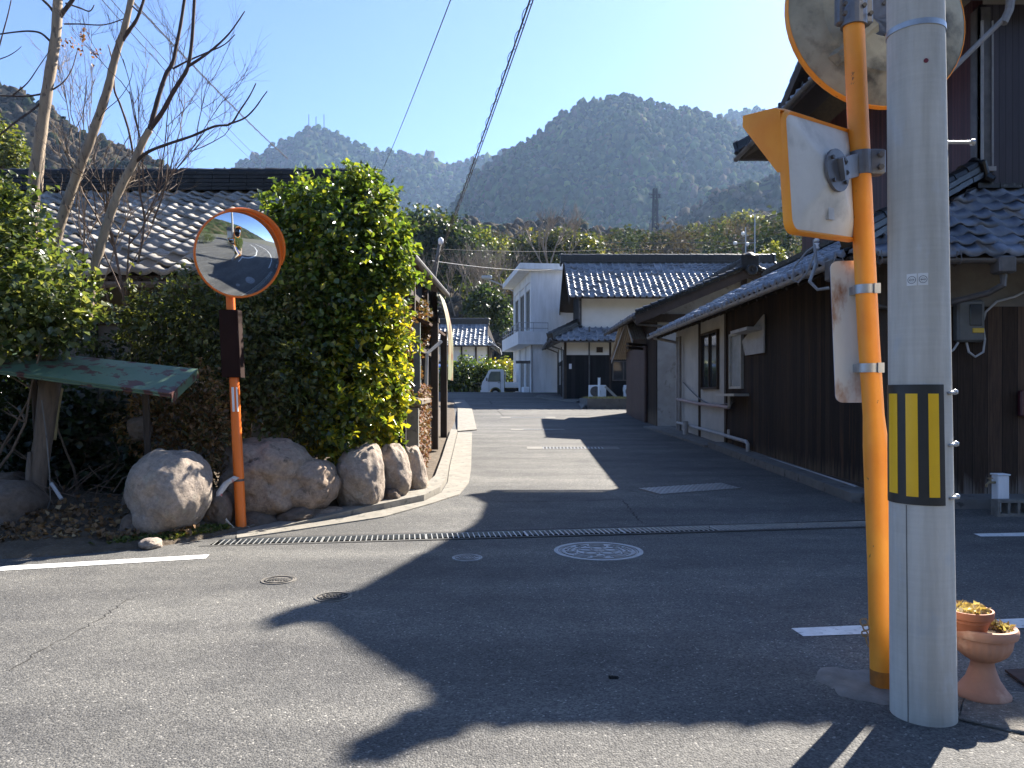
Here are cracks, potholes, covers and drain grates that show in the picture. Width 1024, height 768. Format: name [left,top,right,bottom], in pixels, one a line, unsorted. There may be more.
manhole cover [554,542,643,561]
crack [7,596,136,671]
drain grate [524,528,625,536]
drain grate [212,536,324,545]
manhole cover [261,575,297,585]
drain grate [426,531,527,539]
drain grate [321,533,426,542]
drain grate [618,525,718,533]
manhole cover [314,591,352,602]
crack [507,489,658,524]
